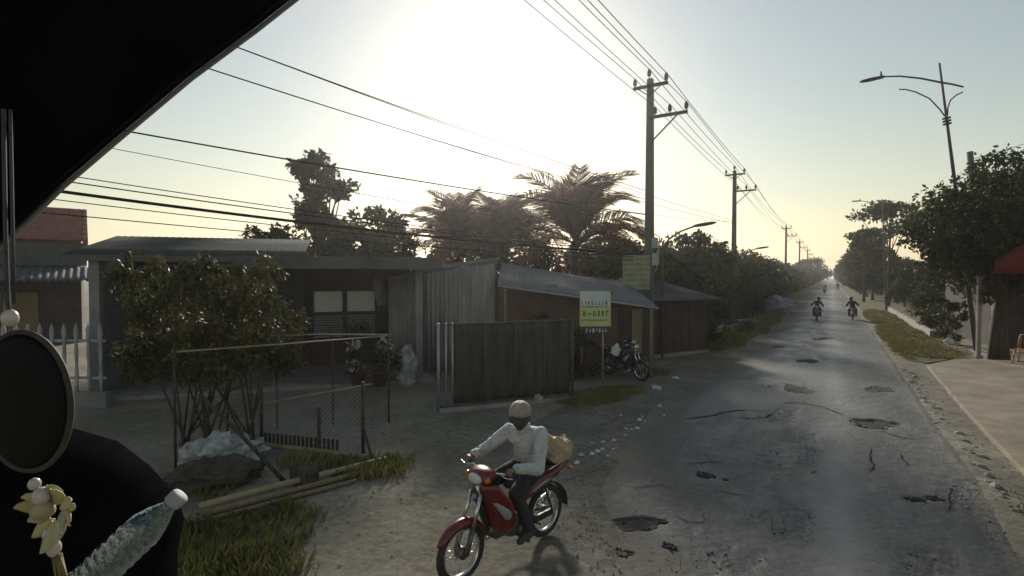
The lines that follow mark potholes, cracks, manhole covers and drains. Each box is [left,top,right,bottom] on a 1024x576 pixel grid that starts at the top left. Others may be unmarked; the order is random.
crack [675,486,814,575]
crack [940,479,1016,556]
crack [687,402,845,473]
pothole [762,383,815,394]
pothole [611,514,669,531]
crack [868,430,919,472]
pothole [849,419,900,429]
